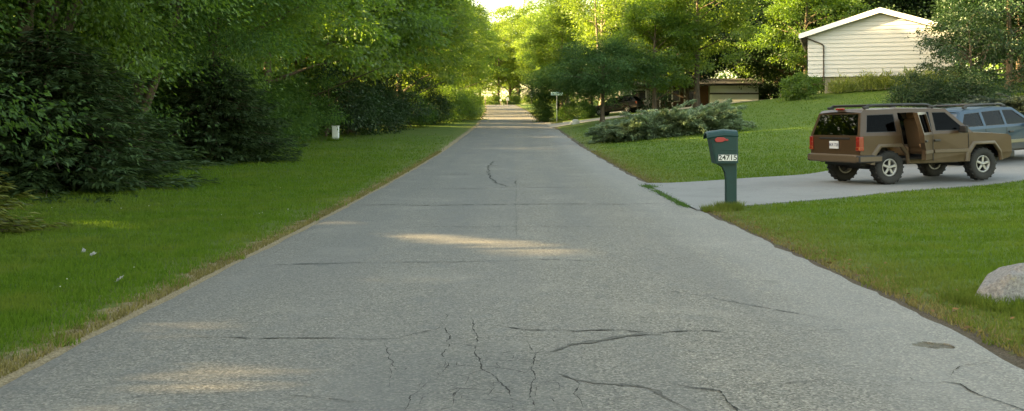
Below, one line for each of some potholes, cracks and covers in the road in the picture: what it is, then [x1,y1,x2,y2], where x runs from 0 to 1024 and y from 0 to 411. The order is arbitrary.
crack [877,361,1024,410]
crack [448,161,647,205]
crack [234,290,852,411]
pothole [911,341,955,349]
